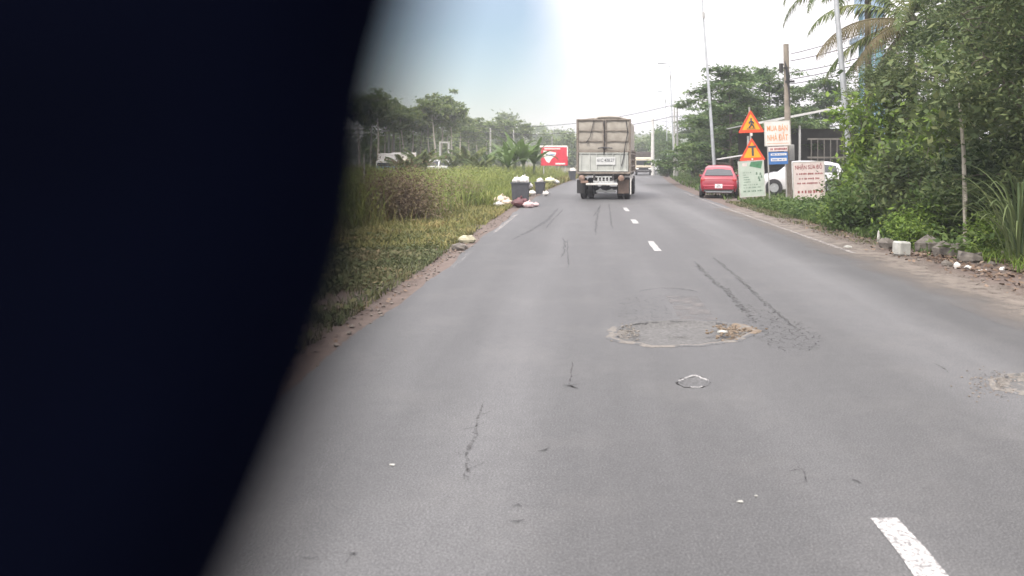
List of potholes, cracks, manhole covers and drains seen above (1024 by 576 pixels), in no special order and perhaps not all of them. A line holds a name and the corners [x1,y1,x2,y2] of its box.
pothole [605,319,762,347]
pothole [678,375,711,388]
pothole [988,373,1024,395]
crack [619,262,821,351]
crack [465,406,486,480]
